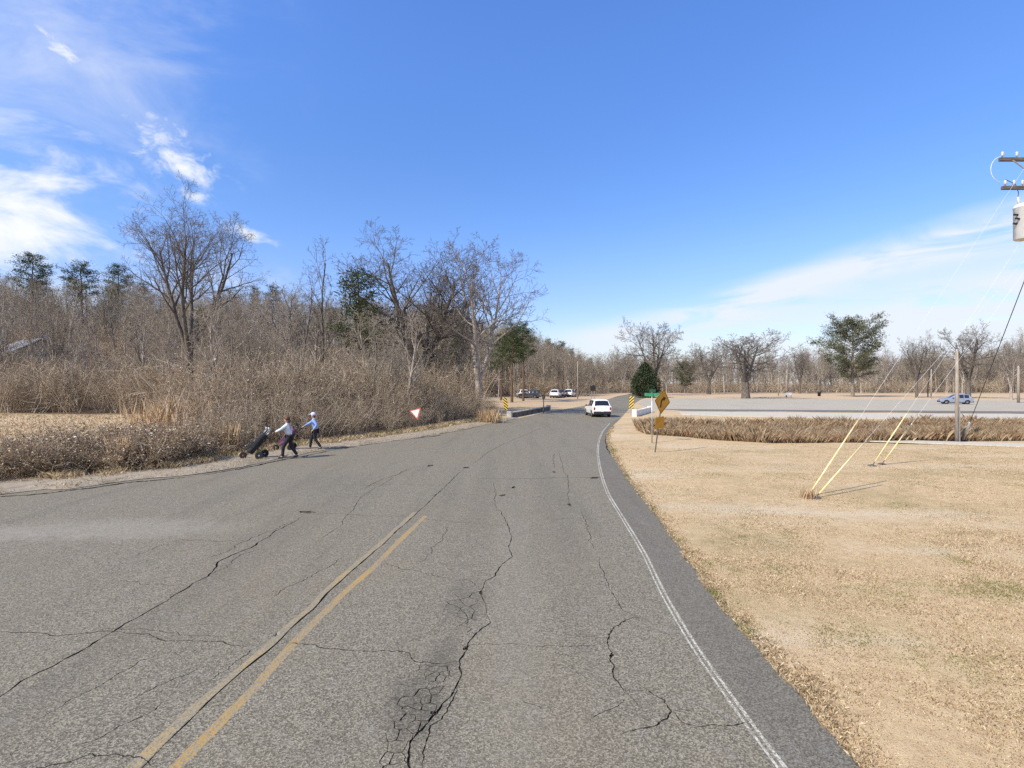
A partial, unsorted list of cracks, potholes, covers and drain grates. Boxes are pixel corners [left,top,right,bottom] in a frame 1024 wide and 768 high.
crack [0,516,302,768]
crack [276,431,748,768]
